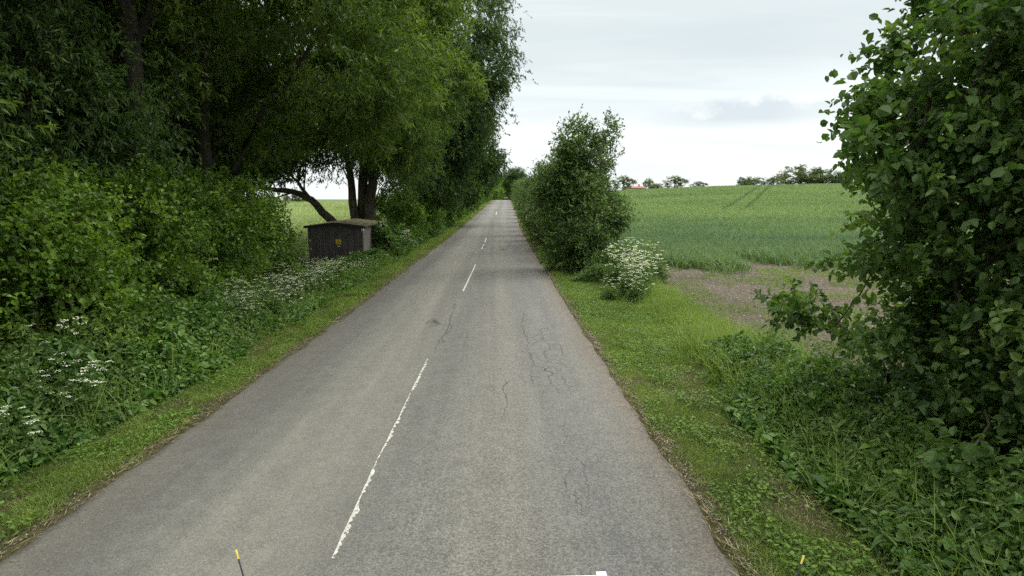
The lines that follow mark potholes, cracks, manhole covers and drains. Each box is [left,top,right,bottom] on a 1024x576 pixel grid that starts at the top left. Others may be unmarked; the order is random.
crack [434,219,529,353]
crack [519,313,577,395]
crack [562,421,604,532]
